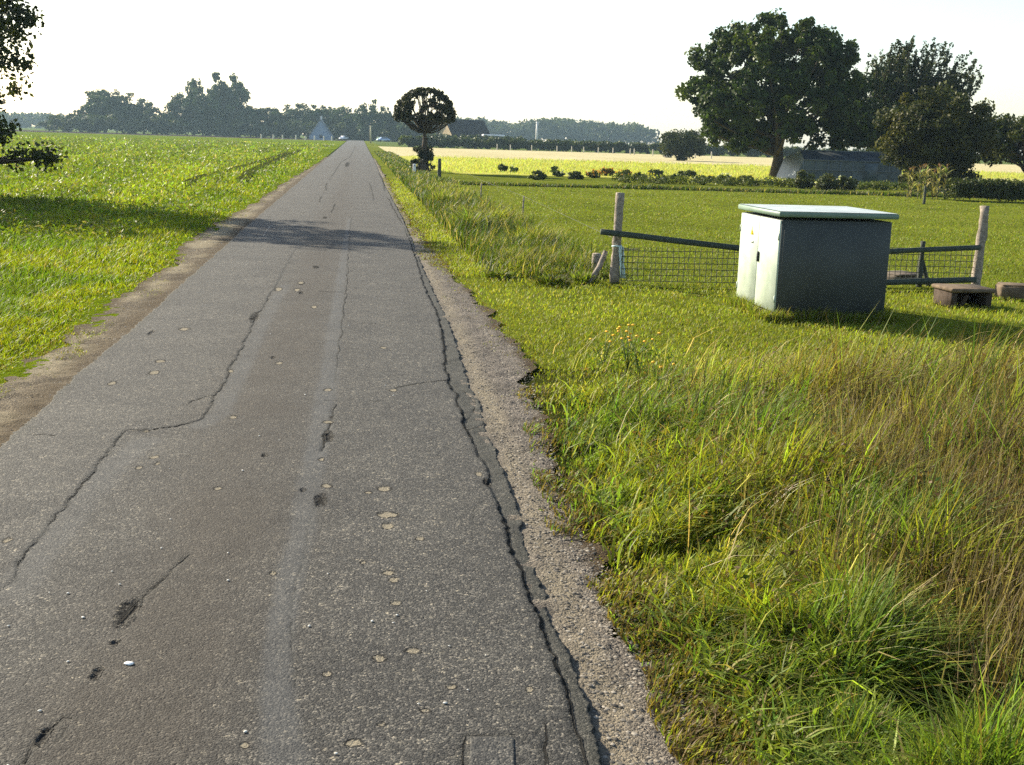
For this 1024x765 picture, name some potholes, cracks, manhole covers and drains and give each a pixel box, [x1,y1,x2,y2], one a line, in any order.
pothole [34,726,54,747]
pothole [313,493,327,507]
crack [121,557,186,621]
pothole [113,596,143,631]
crack [3,293,271,588]
crack [369,174,491,483]
crack [497,501,587,765]
